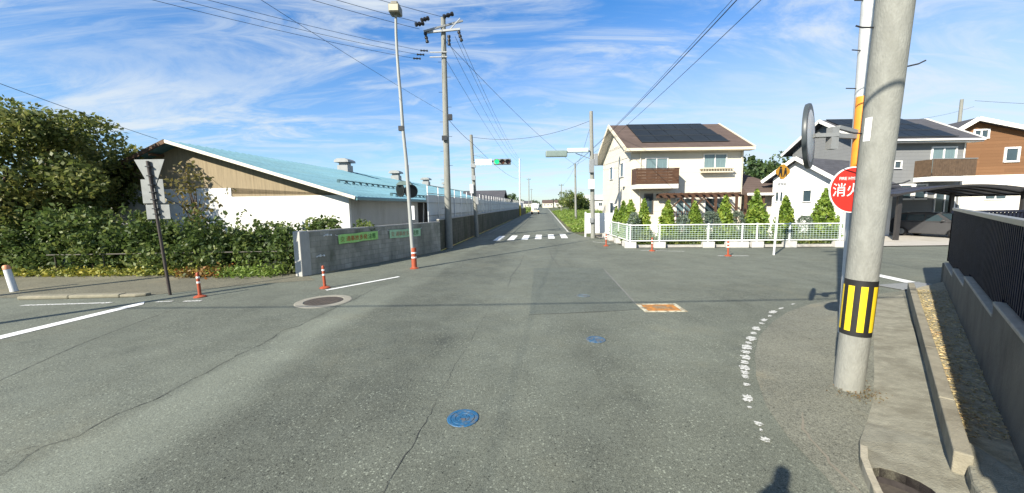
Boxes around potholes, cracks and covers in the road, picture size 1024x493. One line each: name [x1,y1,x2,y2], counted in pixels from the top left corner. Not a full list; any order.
manhole cover [294,295,352,308]
manhole cover [447,409,479,427]
manhole cover [636,303,688,312]
crack [384,311,488,491]
